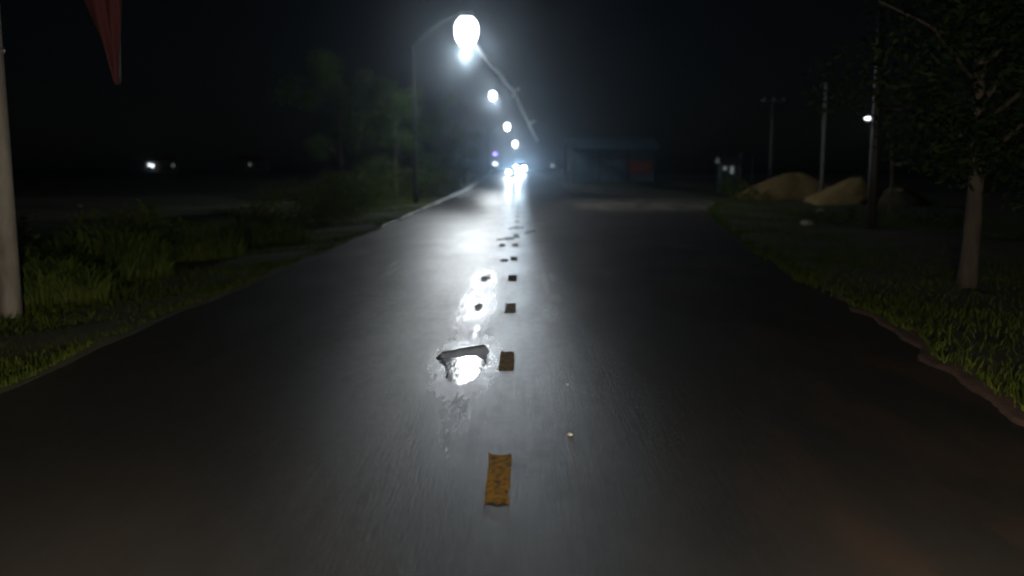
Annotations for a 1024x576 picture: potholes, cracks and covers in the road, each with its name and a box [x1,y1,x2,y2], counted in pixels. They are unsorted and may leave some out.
pothole [436,344,489,385]
